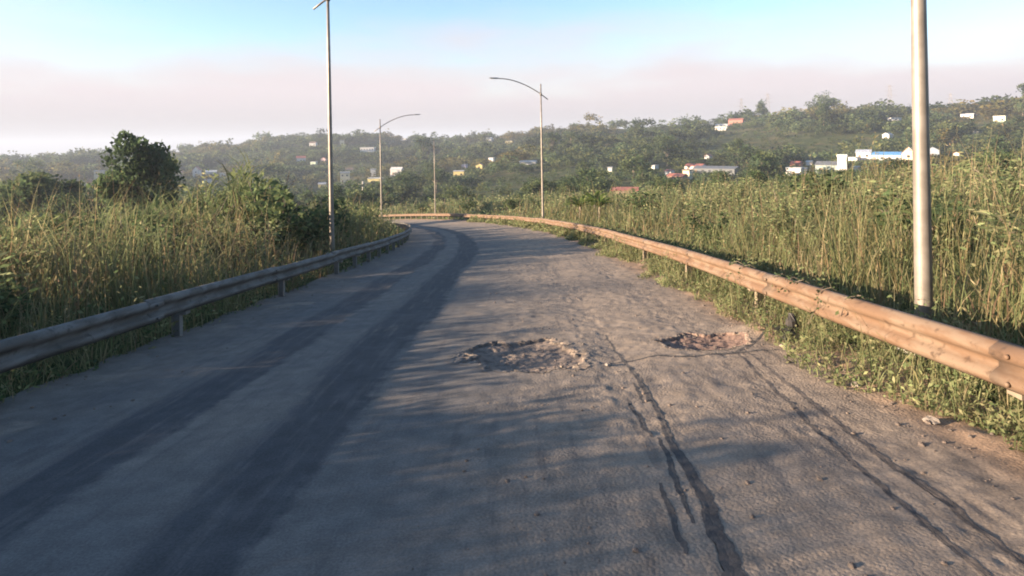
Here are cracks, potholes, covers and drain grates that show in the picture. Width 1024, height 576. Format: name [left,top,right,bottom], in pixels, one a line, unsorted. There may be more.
pothole [651,330,754,351]
pothole [445,338,591,373]
